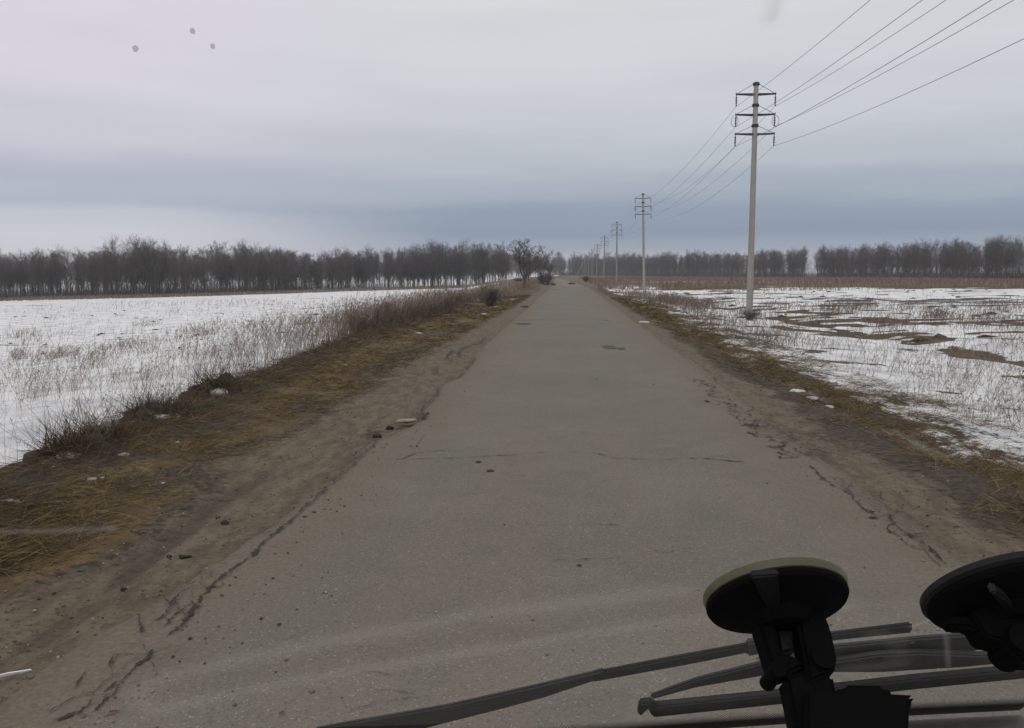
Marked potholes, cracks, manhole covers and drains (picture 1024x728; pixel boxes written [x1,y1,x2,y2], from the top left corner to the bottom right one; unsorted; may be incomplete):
crack [693,378,946,566]
crack [454,451,744,462]
